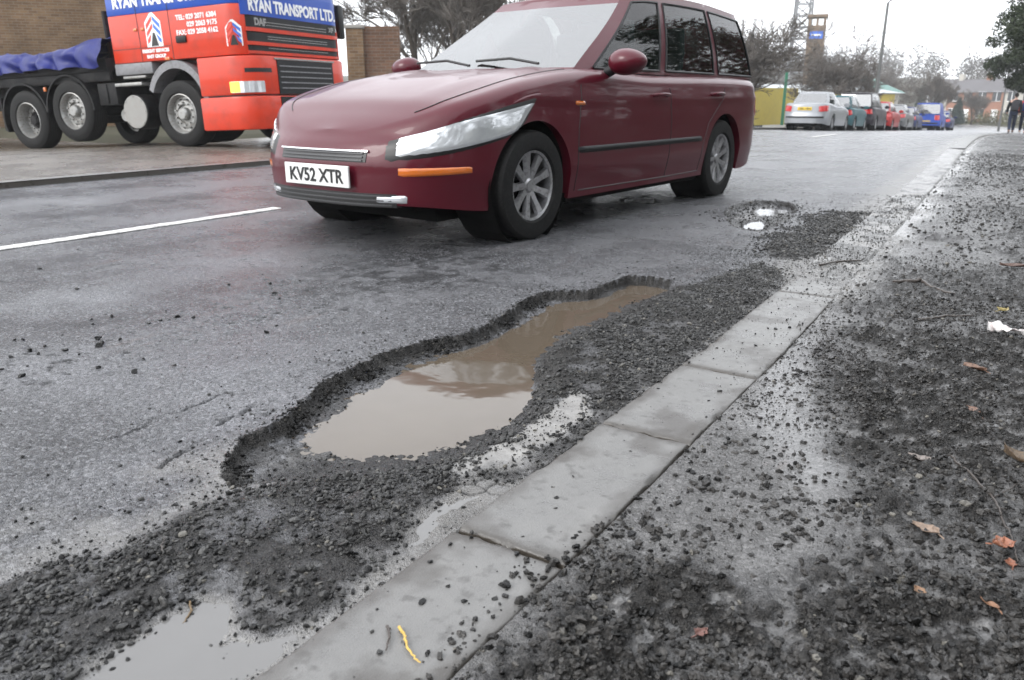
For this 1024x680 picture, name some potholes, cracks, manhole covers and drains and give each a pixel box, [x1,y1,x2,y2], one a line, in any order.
crack [93,391,254,469]
pothole [723,200,799,232]
pothole [220,275,681,487]
